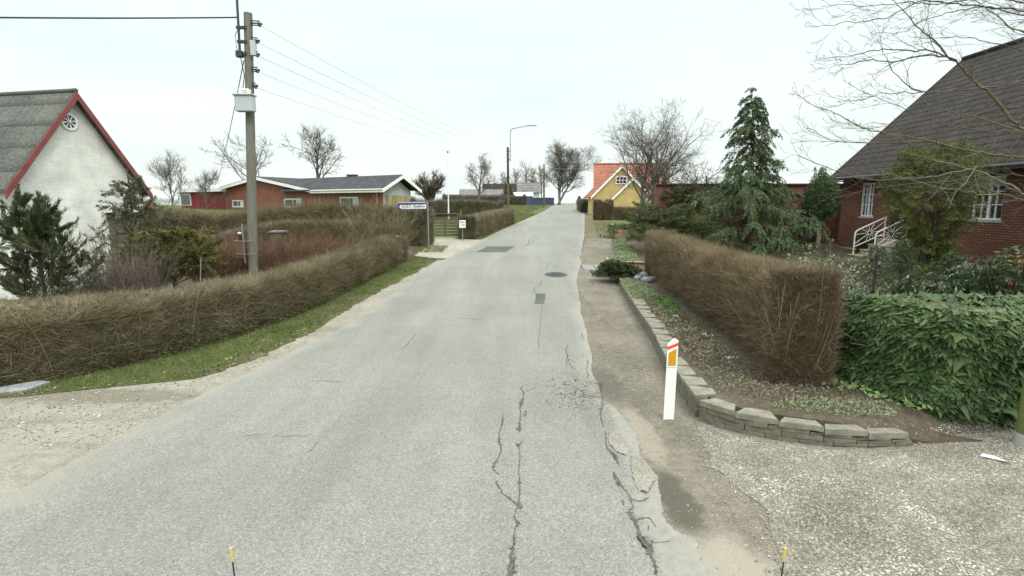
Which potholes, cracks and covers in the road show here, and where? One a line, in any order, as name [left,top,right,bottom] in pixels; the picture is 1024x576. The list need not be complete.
crack [491,385,535,576]
crack [546,333,667,574]
